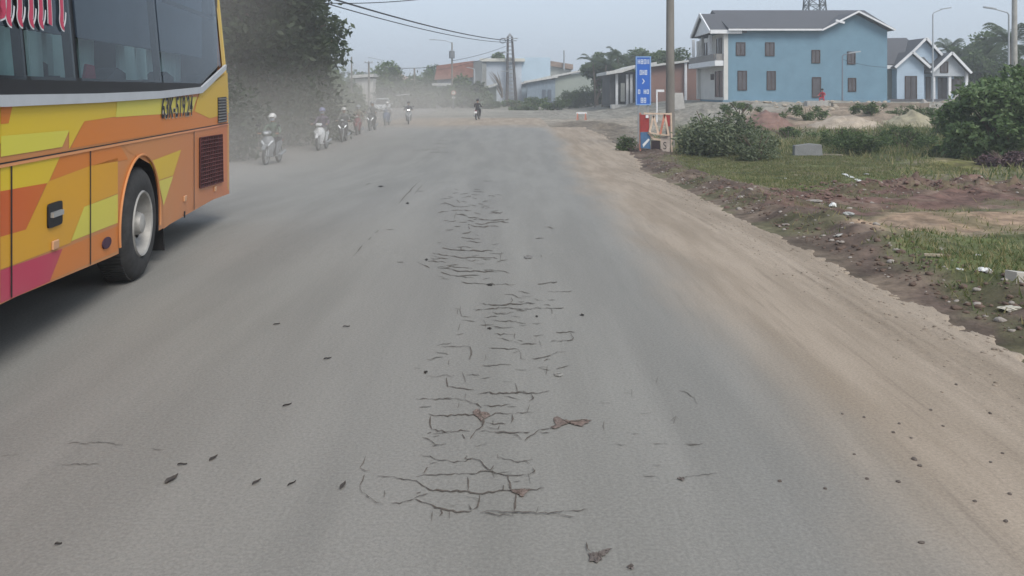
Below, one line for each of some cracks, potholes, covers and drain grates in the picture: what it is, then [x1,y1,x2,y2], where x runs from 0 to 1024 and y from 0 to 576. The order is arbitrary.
crack [360,189,583,521]
